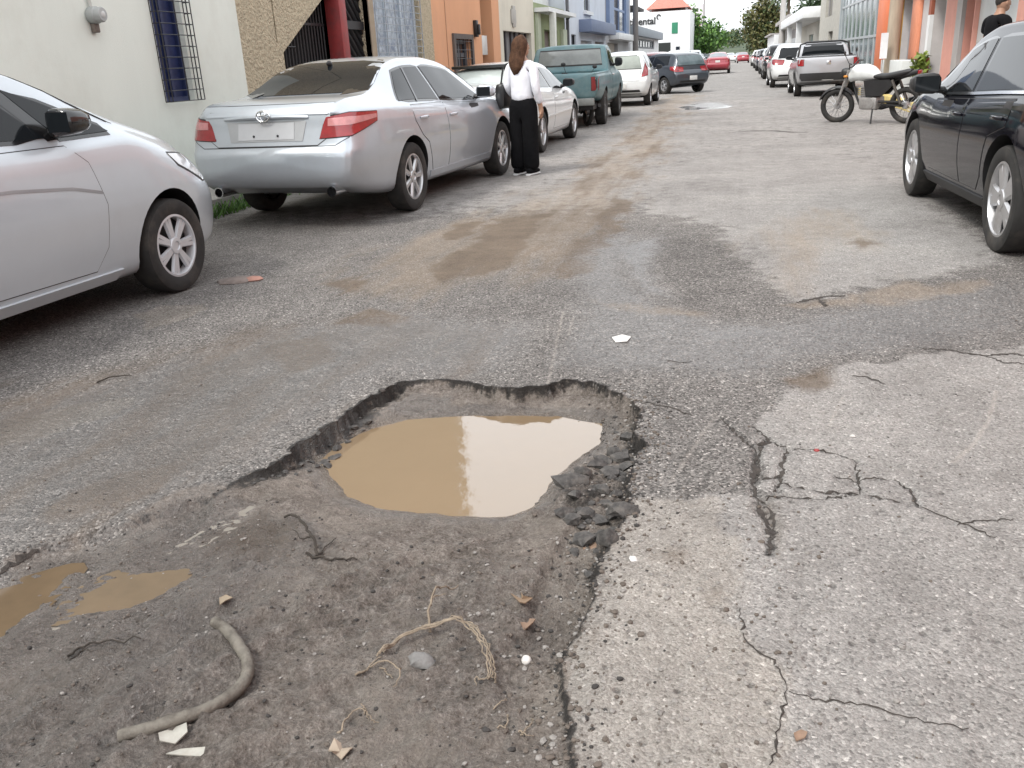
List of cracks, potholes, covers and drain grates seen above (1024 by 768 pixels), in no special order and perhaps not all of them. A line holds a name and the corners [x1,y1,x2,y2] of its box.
crack [922,348,1024,364]
pothole [210,379,646,768]
crack [796,295,845,306]
crack [739,608,969,765]
crack [720,417,1014,555]
